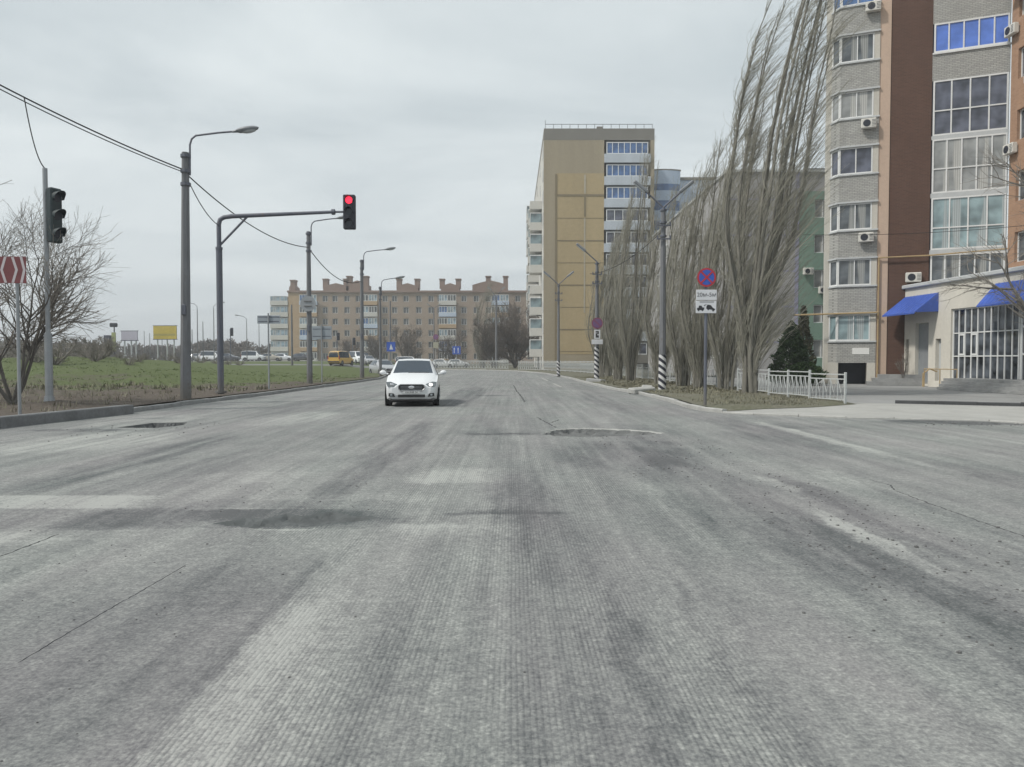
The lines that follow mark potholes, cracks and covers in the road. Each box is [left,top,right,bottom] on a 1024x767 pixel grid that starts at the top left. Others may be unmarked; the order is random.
pothole [214,511,378,529]
crack [18,566,184,663]
crack [872,480,1024,537]
pothole [541,428,661,437]
